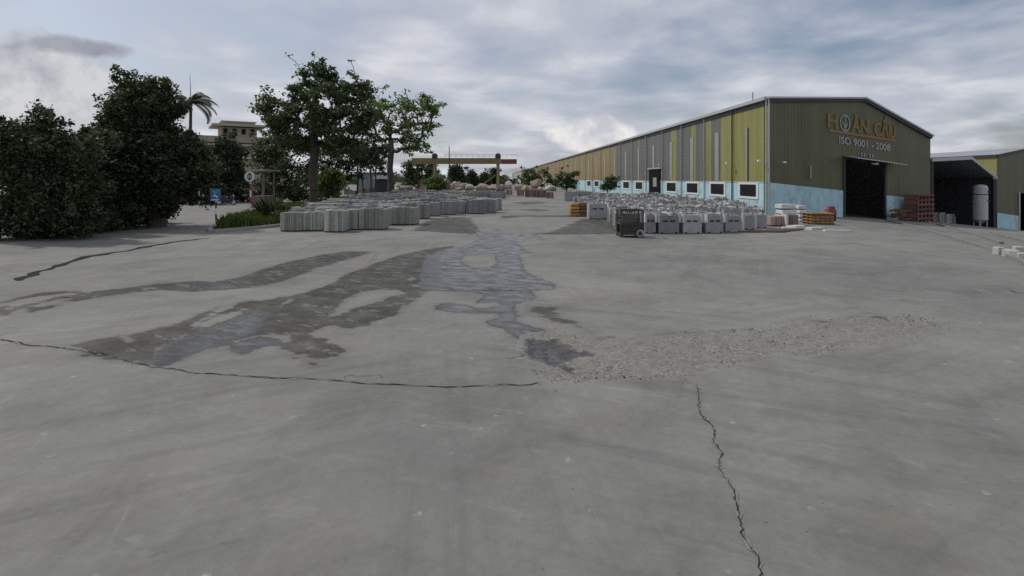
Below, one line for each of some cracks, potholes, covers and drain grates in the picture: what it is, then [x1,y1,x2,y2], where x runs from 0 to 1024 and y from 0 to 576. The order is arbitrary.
crack [0,339,538,387]
crack [695,385,763,576]
